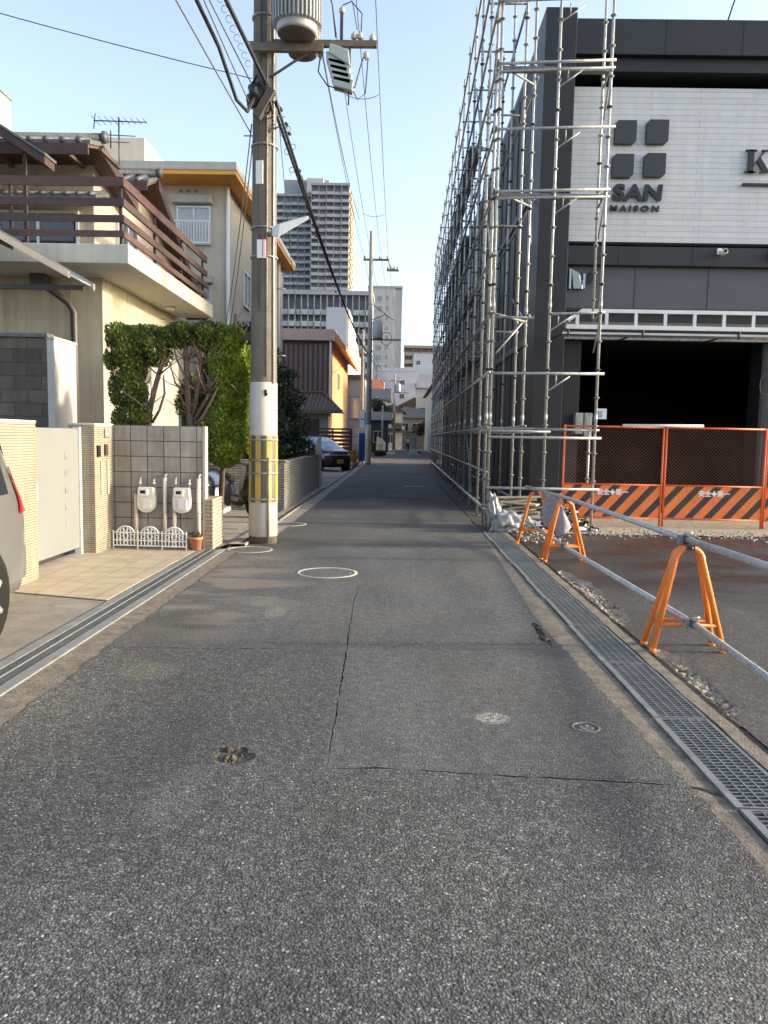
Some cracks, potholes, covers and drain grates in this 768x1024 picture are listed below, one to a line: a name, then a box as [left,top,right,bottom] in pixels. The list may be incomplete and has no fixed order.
manhole cover [296,567,358,578]
drain grate [603,662,707,719]
drain grate [500,551,535,564]
drain grate [512,563,553,580]
pothole [531,622,552,645]
drain grate [491,540,522,551]
crack [327,588,721,795]
drain grate [568,625,645,664]
drain grate [483,532,510,541]
pothole [212,746,256,764]
drain grate [526,578,574,601]
